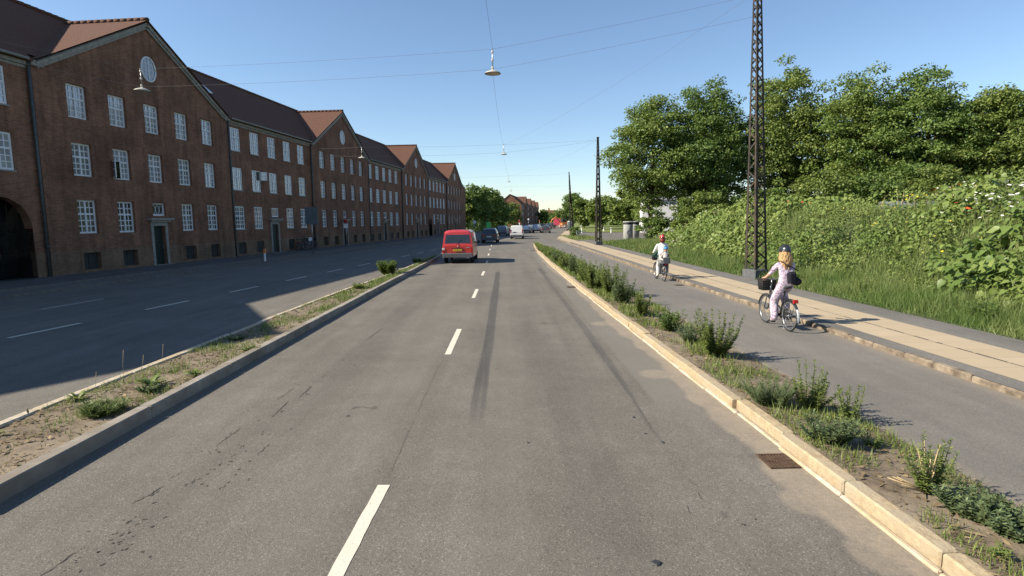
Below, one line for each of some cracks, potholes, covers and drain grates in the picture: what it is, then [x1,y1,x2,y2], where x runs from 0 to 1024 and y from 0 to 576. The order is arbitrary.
drain grate [755,453,801,469]
crack [41,369,335,575]
